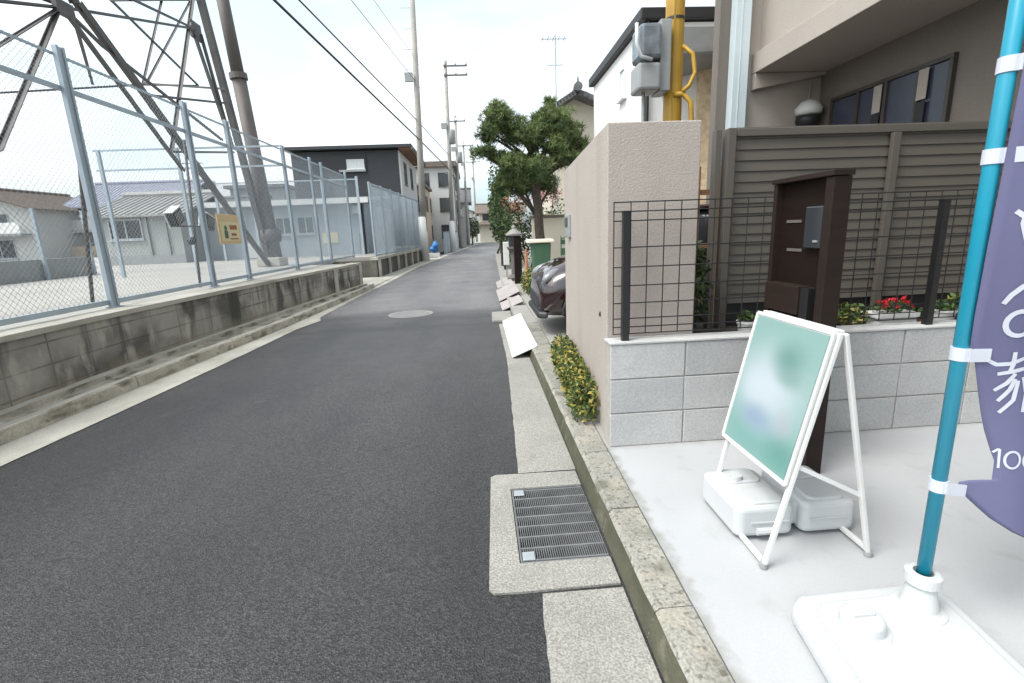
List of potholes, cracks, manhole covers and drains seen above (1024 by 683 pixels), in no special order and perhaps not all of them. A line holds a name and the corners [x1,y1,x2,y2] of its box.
manhole cover [388,310,433,318]
drain grate [489,470,621,596]
